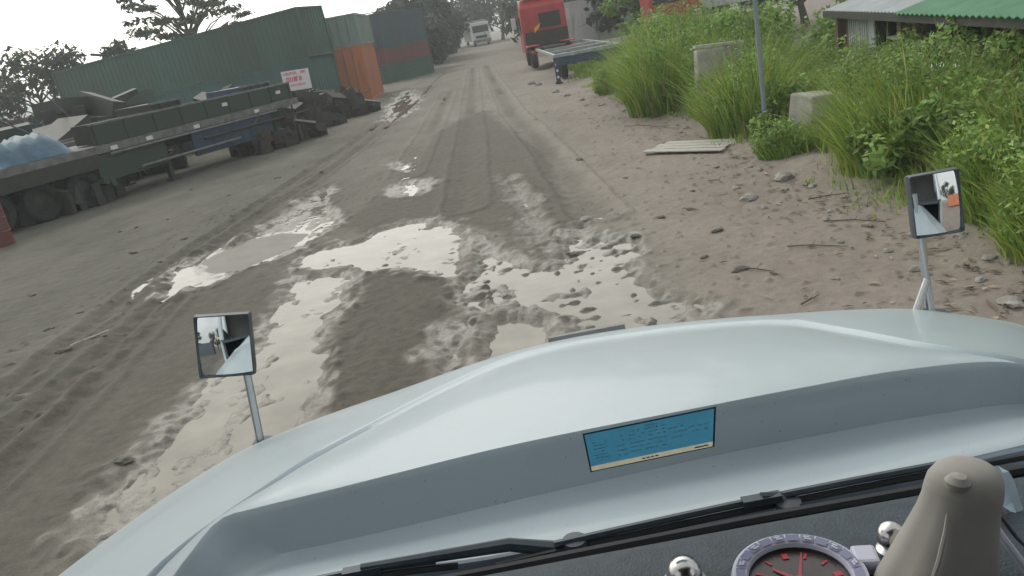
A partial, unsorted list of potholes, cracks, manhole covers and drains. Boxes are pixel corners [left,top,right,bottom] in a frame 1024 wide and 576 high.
pothole [356,169,461,209]
pothole [353,85,446,131]
